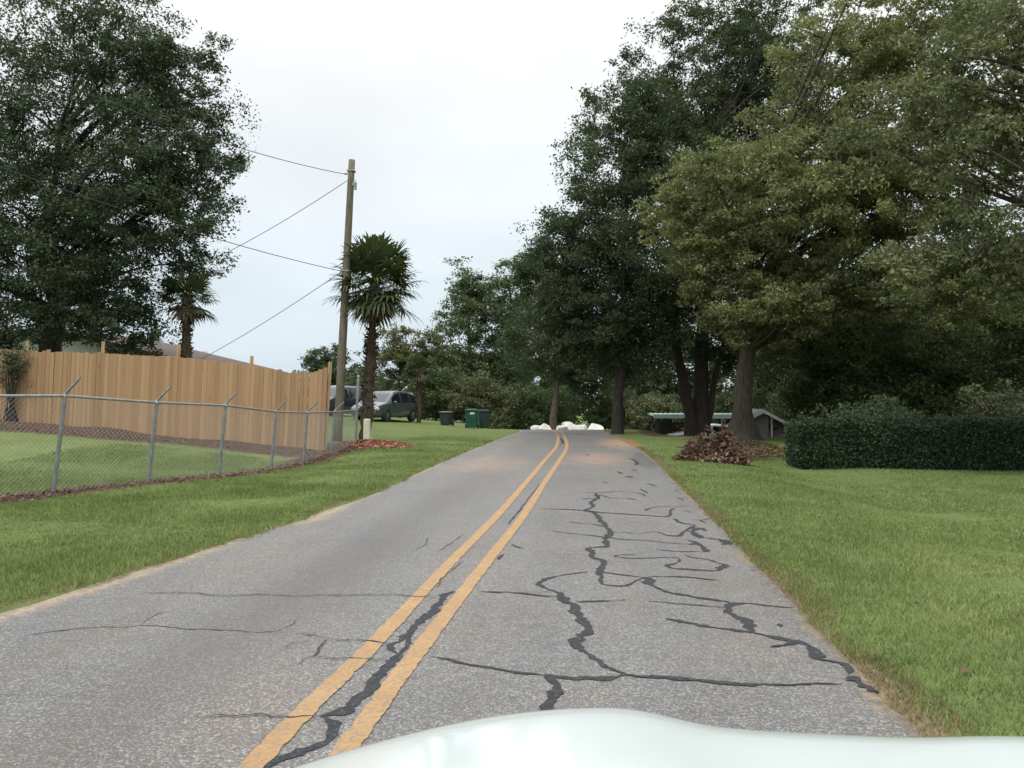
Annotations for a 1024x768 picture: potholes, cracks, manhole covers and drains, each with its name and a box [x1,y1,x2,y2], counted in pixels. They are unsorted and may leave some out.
crack [30,610,387,666]
crack [157,536,466,597]
